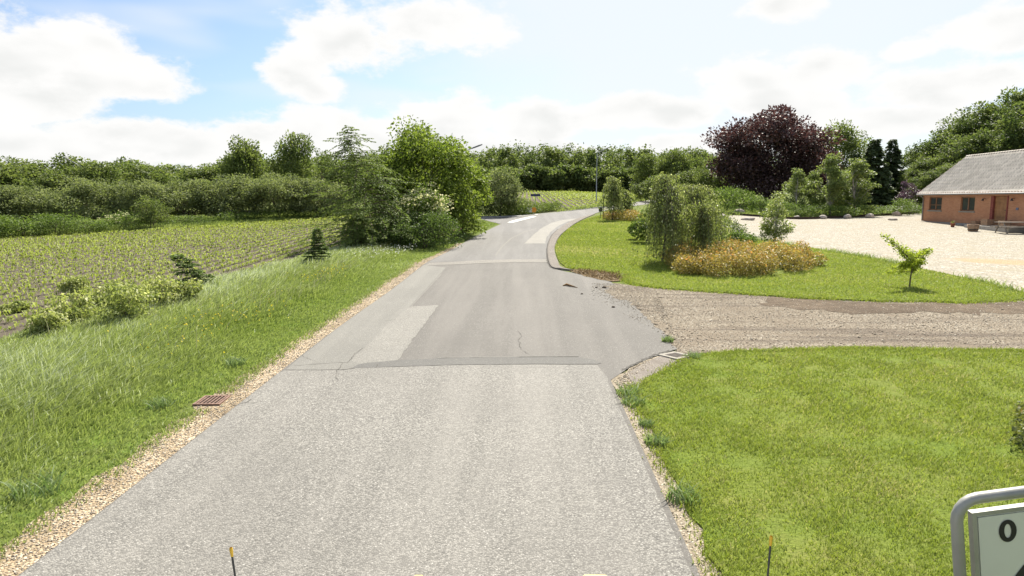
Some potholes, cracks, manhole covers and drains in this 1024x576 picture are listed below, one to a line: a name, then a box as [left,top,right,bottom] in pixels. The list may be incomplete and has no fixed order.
drain grate [658,351,693,360]
drain grate [192,395,231,406]
